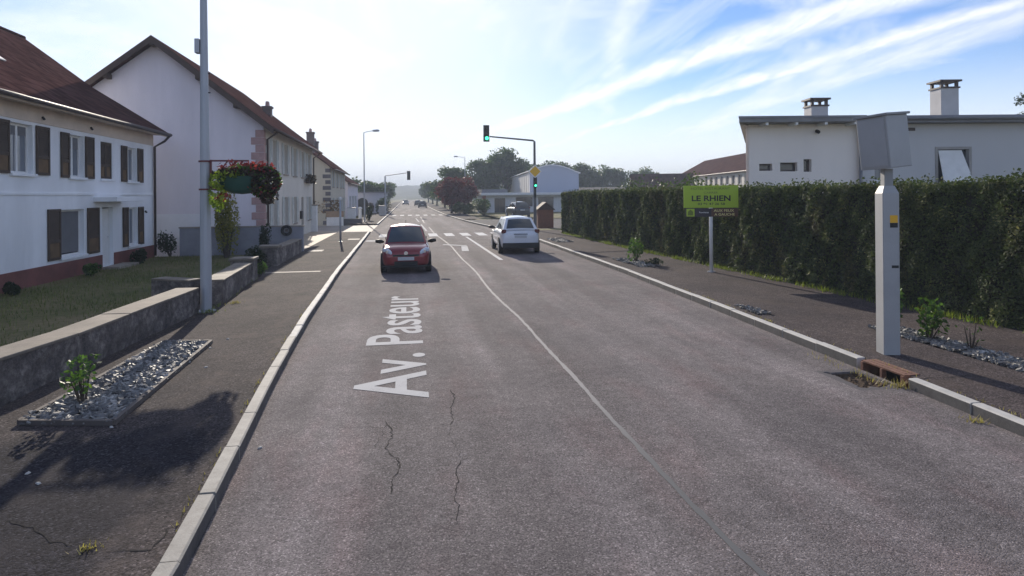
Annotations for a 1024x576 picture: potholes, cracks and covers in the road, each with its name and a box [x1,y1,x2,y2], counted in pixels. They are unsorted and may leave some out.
crack [10,520,175,555]
crack [449,390,468,521]
crack [348,421,401,493]
drain grate [861,359,920,388]
